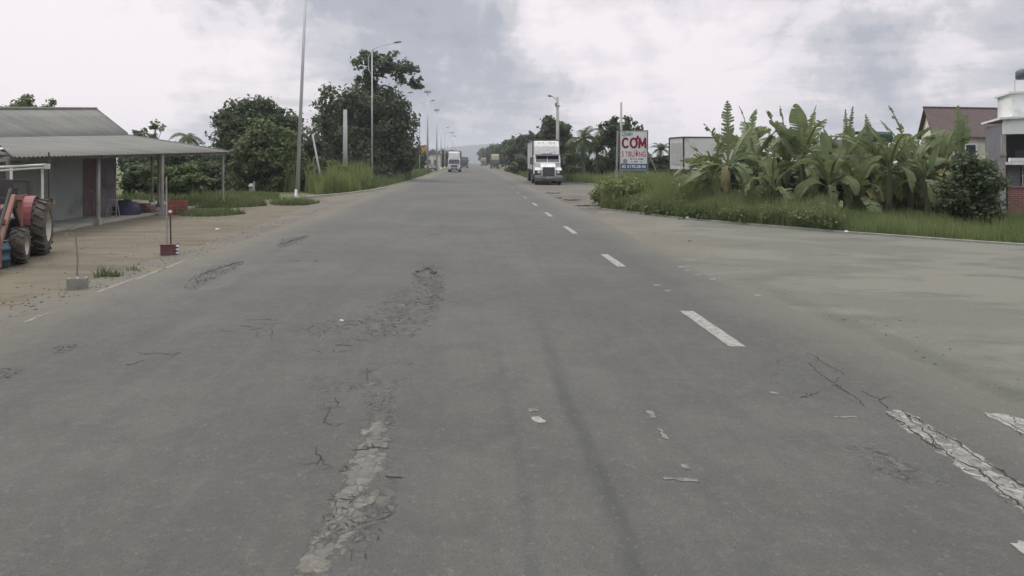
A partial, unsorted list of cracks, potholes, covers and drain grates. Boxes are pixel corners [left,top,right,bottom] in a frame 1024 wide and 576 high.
pothole [413,267,437,279]
crack [301,359,413,560]
crack [768,353,1024,508]
